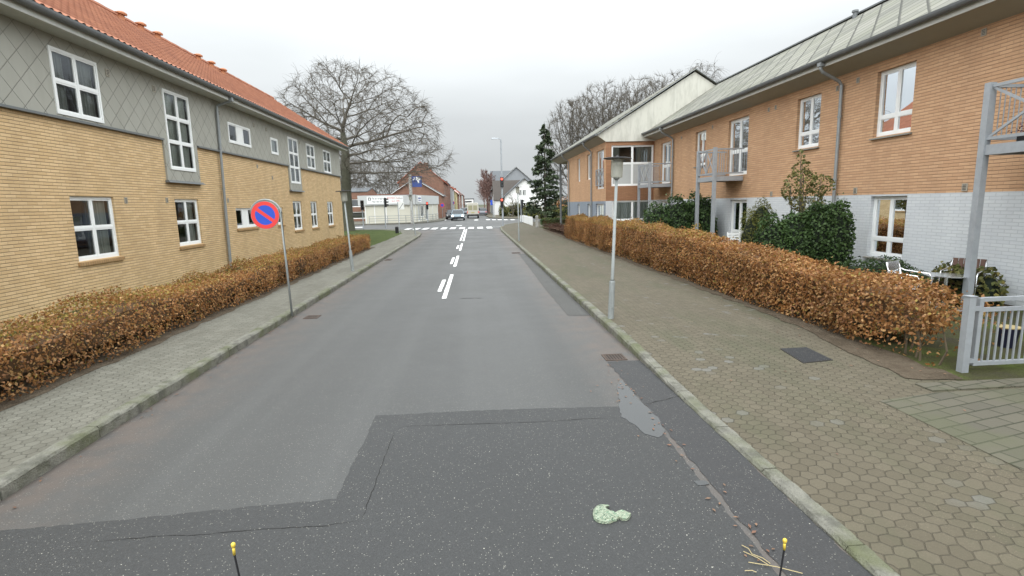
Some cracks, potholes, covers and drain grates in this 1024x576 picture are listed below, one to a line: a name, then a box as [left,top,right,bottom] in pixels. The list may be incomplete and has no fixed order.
manhole cover [780,347,833,364]
drain grate [601,353,628,361]
